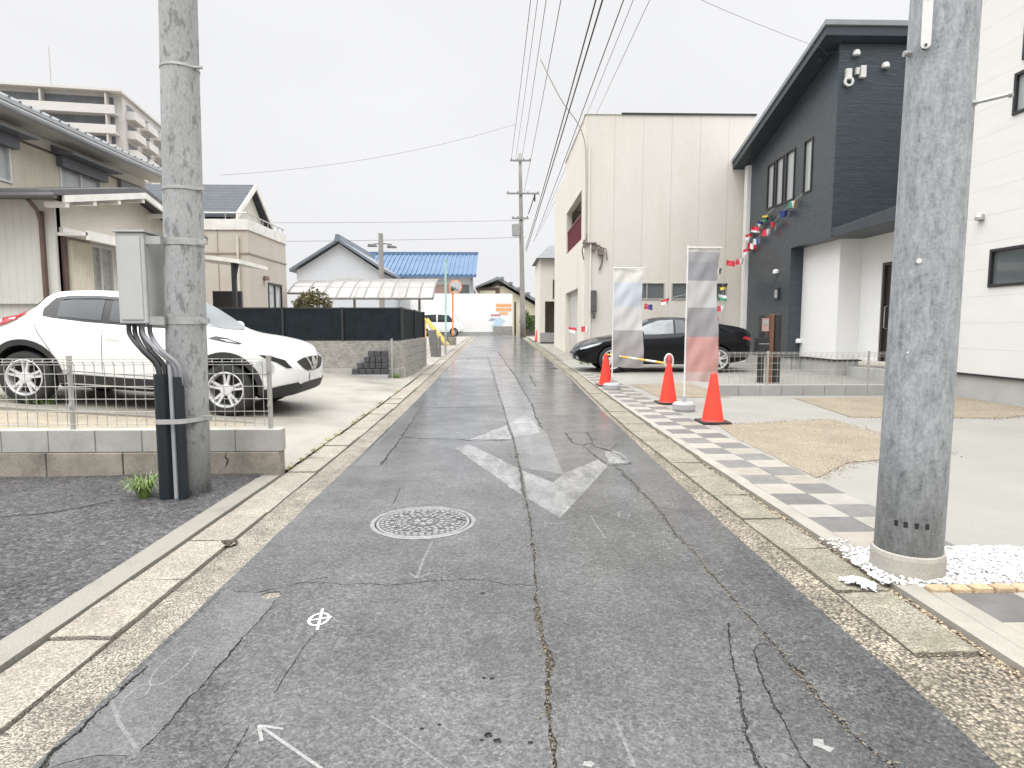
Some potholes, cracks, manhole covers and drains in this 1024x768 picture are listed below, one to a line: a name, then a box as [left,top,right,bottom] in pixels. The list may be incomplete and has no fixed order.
manhole cover [370,506,476,540]
crack [0,500,114,517]
crack [380,352,564,768]
crack [75,601,275,760]
crack [566,433,909,768]
